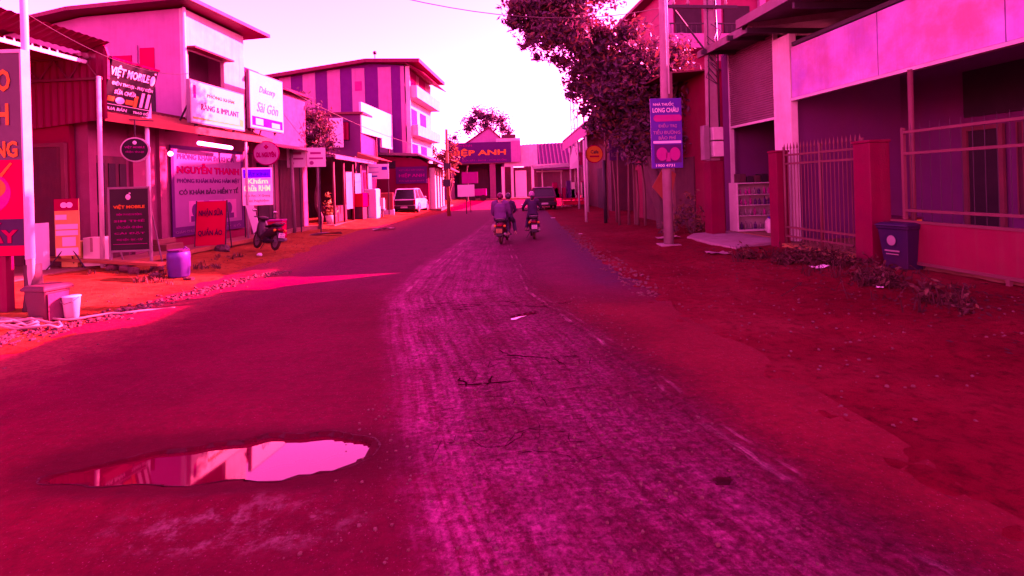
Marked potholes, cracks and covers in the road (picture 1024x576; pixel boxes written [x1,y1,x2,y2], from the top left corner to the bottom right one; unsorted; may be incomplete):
pothole [712,477,736,485]
crack [432,350,602,461]
pothole [36,430,381,487]
